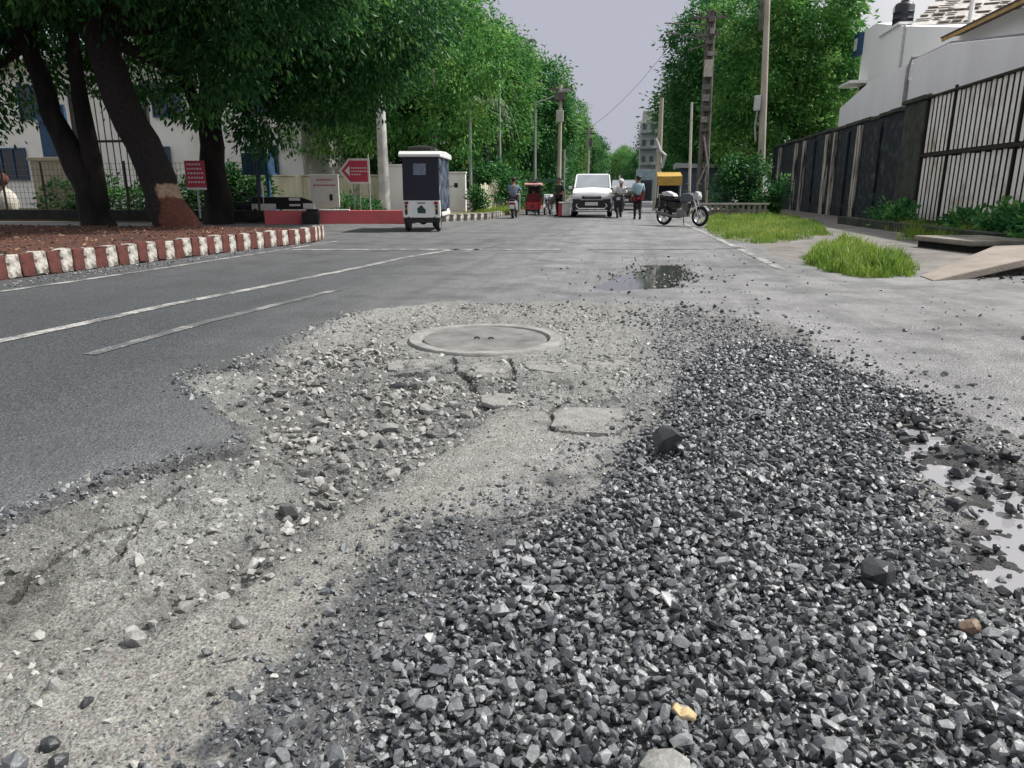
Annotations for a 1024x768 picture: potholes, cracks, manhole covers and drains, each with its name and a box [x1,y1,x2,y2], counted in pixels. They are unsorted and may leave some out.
manhole cover [408,323,562,357]
pothole [591,263,701,291]
pothole [0,300,1024,768]
crack [388,356,517,395]
crack [7,486,182,606]
